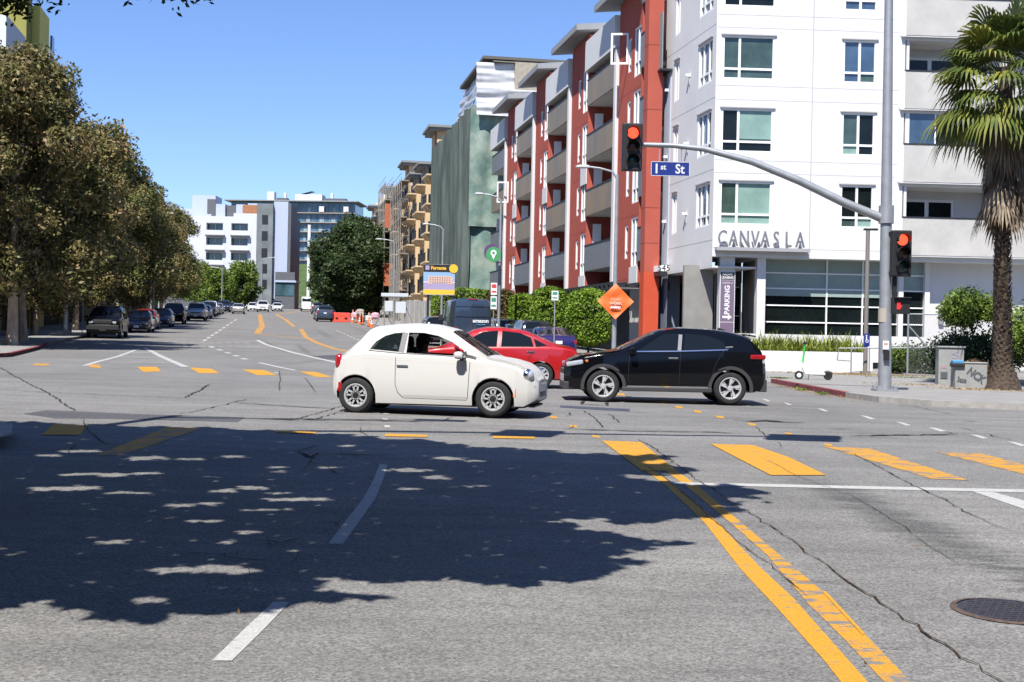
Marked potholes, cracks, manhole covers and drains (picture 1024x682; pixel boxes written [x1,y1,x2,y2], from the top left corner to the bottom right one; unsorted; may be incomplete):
crack [263,428,385,486]
manhole cover [950,597,1024,624]
crack [0,367,344,452]
crack [636,439,1004,682]
crack [557,399,619,428]
